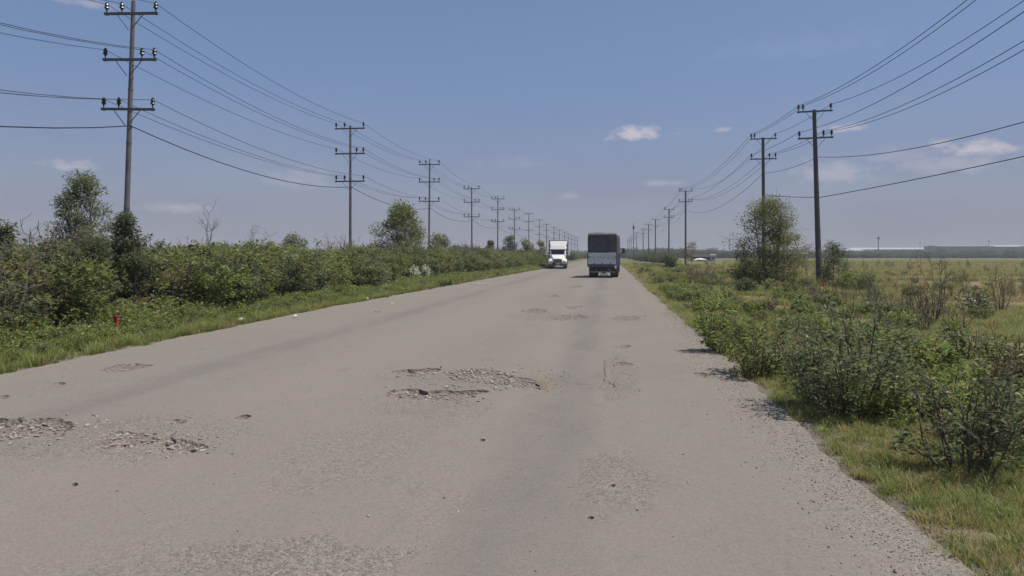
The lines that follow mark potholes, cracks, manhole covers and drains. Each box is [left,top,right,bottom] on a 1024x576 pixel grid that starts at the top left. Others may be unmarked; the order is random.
pothole [48,428,189,454]
pothole [384,367,446,378]
pothole [140,436,229,458]
pothole [410,365,566,392]
pothole [99,363,154,372]
pothole [376,386,503,404]
pothole [0,413,111,445]
